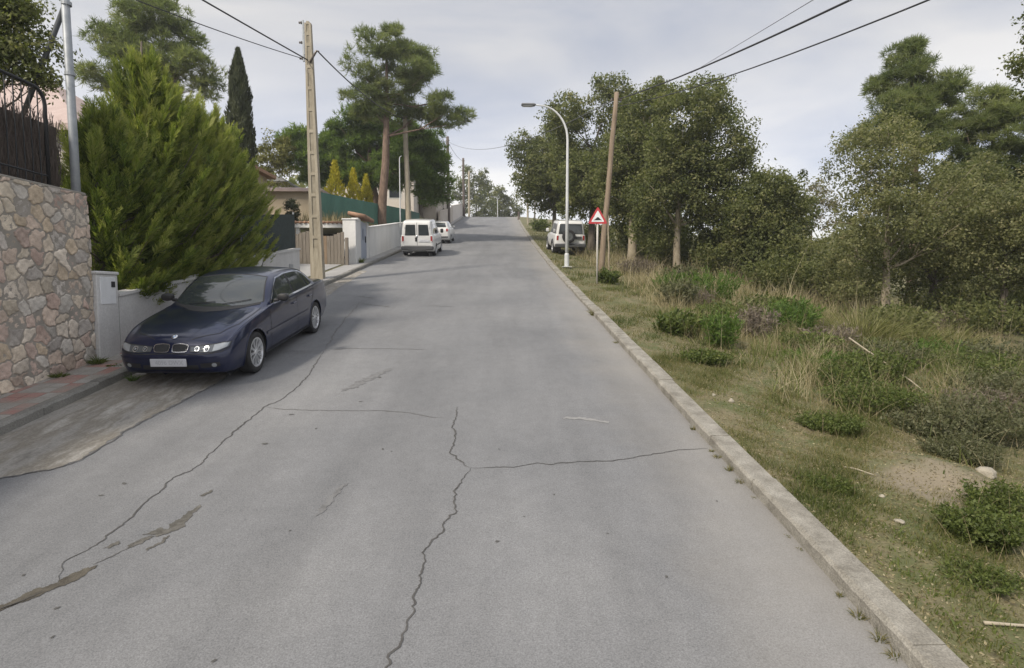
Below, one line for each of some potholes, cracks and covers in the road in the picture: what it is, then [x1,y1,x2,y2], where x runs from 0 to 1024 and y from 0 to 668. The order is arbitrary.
crack [58,296,702,668]
